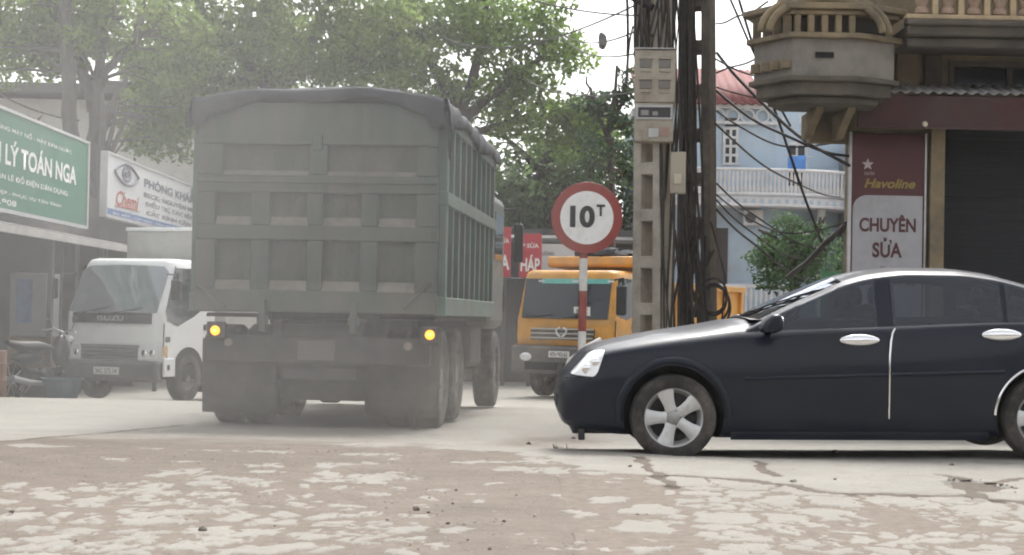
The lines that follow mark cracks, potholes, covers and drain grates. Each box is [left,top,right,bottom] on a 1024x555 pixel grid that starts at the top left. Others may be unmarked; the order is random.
crack [558,457,1024,555]
